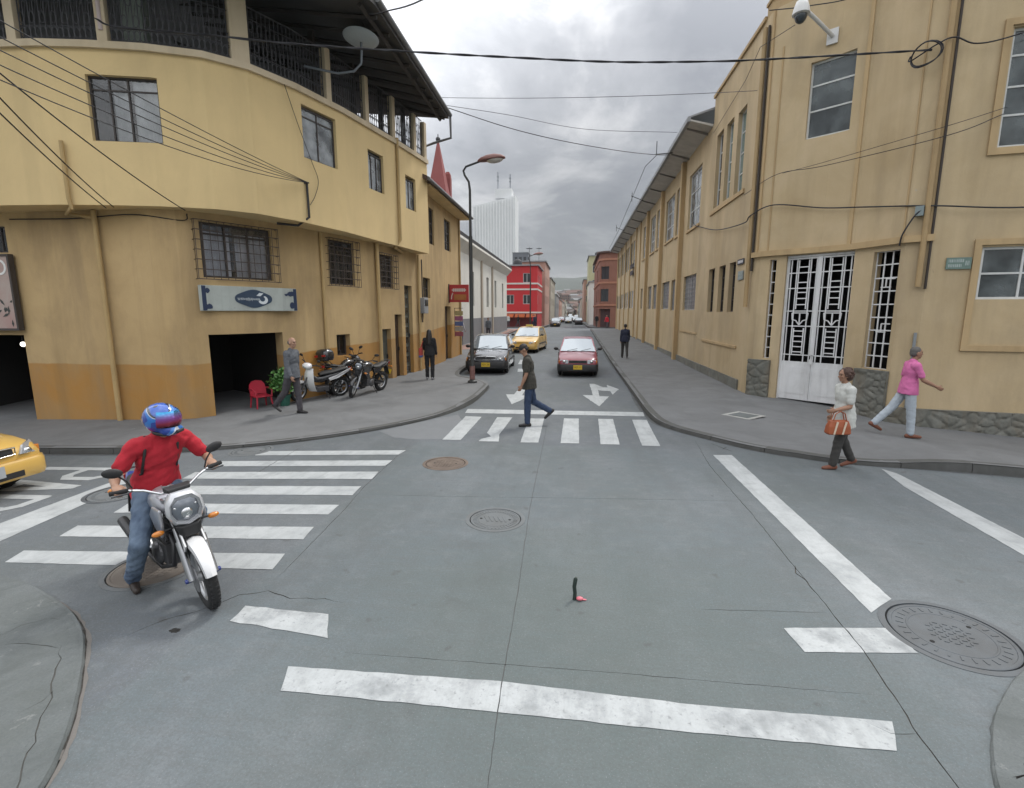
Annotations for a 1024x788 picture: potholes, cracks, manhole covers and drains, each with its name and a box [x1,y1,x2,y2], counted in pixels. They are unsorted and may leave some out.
crack [127,591,343,636]
manhole cover [877,600,1024,677]
manhole cover [422,457,468,471]
utility cover [721,411,765,420]
manhole cover [97,556,186,592]
manhole cover [465,507,525,532]
manhole cover [81,484,128,504]
